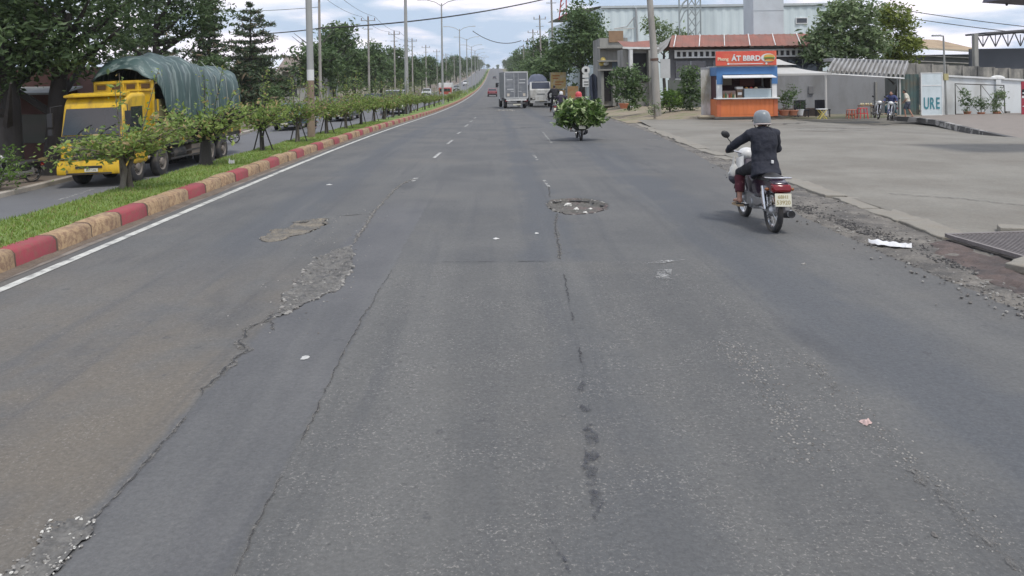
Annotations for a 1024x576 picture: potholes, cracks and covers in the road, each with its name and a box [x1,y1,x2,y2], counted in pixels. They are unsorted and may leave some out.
pothole [546,198,608,215]
drain grate [945,231,1024,260]
crack [200,179,412,576]
